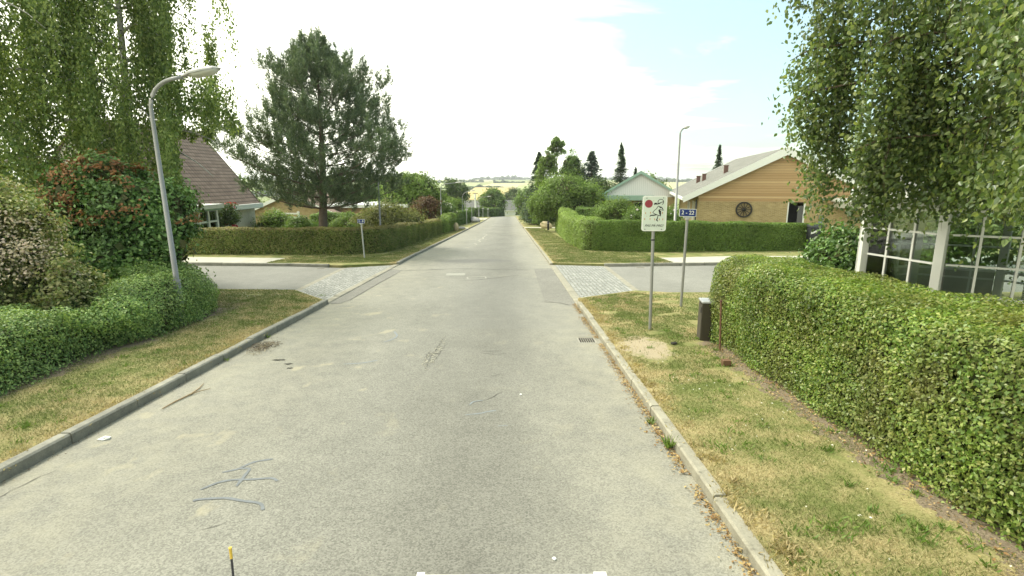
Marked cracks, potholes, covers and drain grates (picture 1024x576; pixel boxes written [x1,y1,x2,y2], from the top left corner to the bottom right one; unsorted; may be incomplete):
crack [421,335,448,373]
